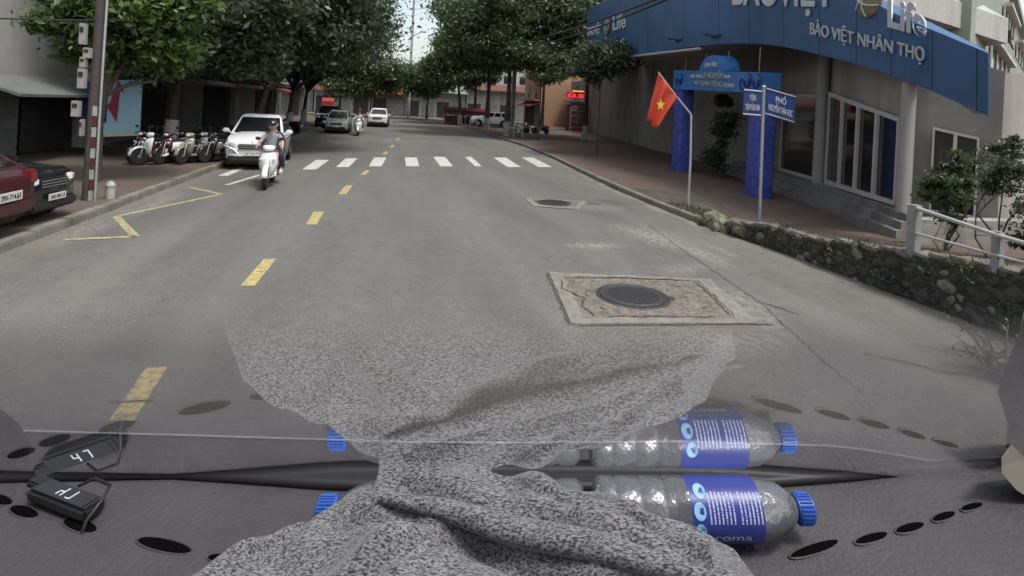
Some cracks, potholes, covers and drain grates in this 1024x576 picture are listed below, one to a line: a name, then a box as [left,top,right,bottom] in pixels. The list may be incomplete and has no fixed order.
manhole cover [524,198,588,210]
manhole cover [548,272,758,325]
crack [546,273,773,326]
